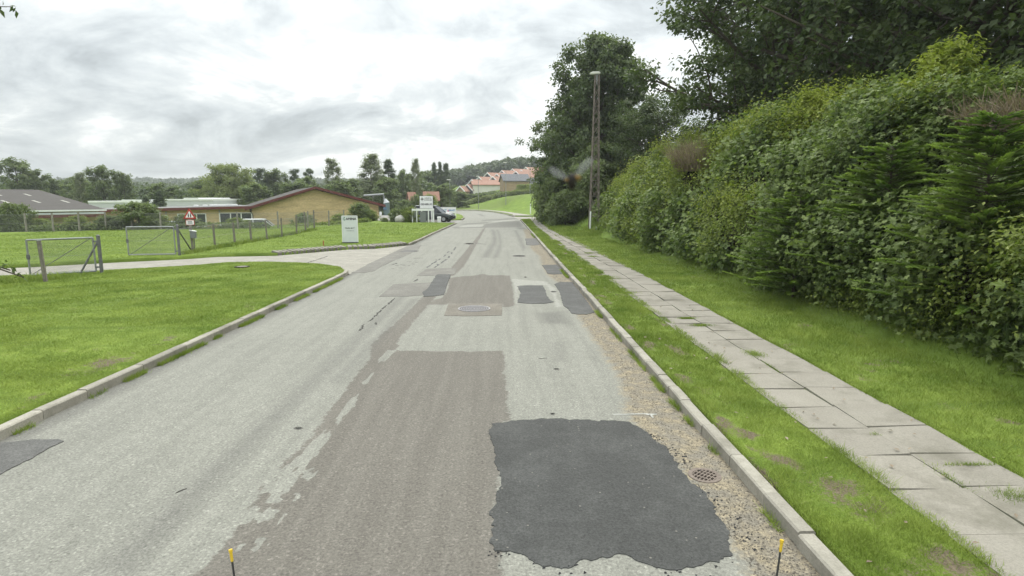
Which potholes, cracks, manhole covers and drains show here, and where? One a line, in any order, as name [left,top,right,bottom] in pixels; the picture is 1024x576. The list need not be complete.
drain grate [688,468,722,483]
